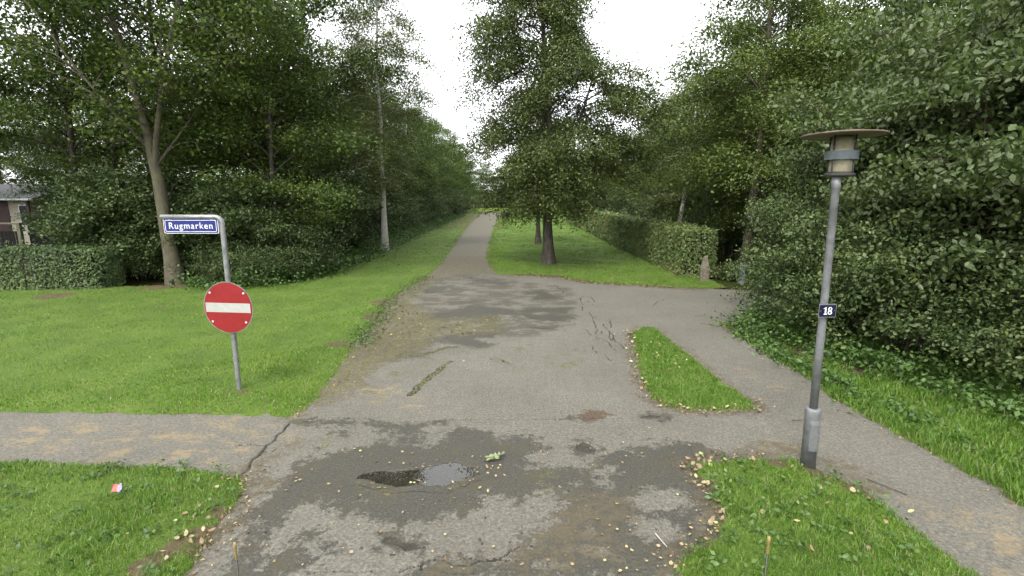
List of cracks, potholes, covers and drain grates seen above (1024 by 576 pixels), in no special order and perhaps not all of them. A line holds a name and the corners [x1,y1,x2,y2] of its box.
crack [295,537,548,576]
pothole [344,456,493,494]
crack [552,284,630,363]
